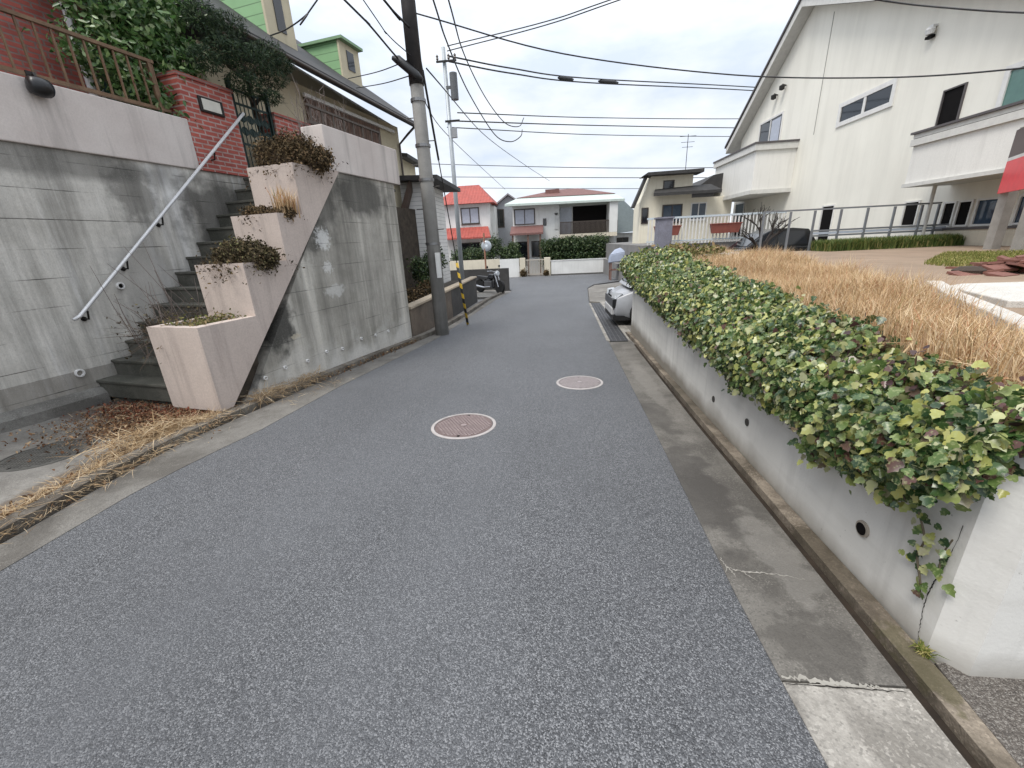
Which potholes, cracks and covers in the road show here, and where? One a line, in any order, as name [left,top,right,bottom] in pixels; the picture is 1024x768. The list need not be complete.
manhole cover [431,413,496,439]
drain grate [589,303,631,342]
crack [720,558,805,580]
manhole cover [556,376,603,390]
